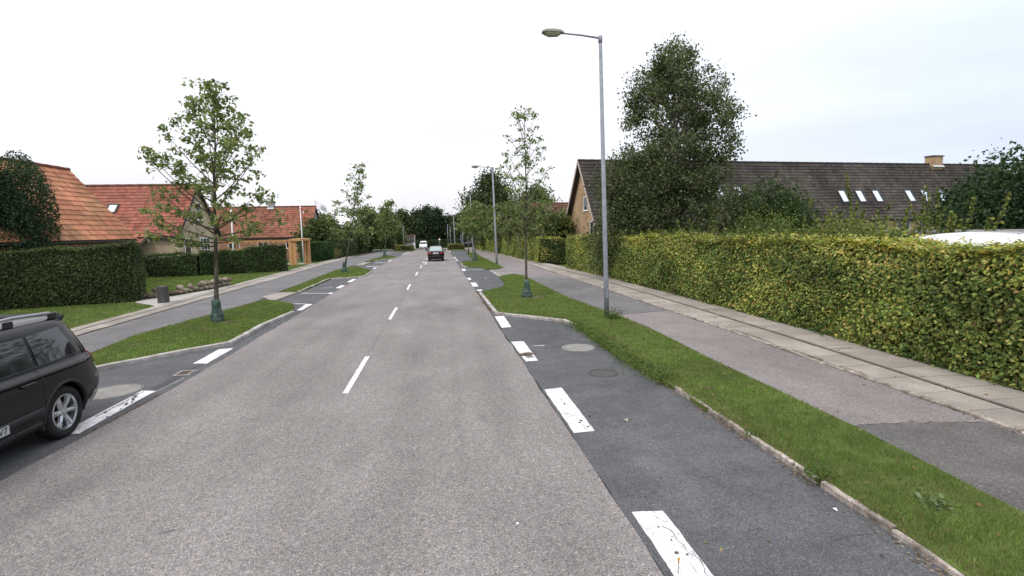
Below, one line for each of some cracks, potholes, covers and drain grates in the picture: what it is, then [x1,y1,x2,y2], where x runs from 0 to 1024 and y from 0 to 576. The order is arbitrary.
manhole cover [588,369,618,377]
manhole cover [92,384,144,400]
